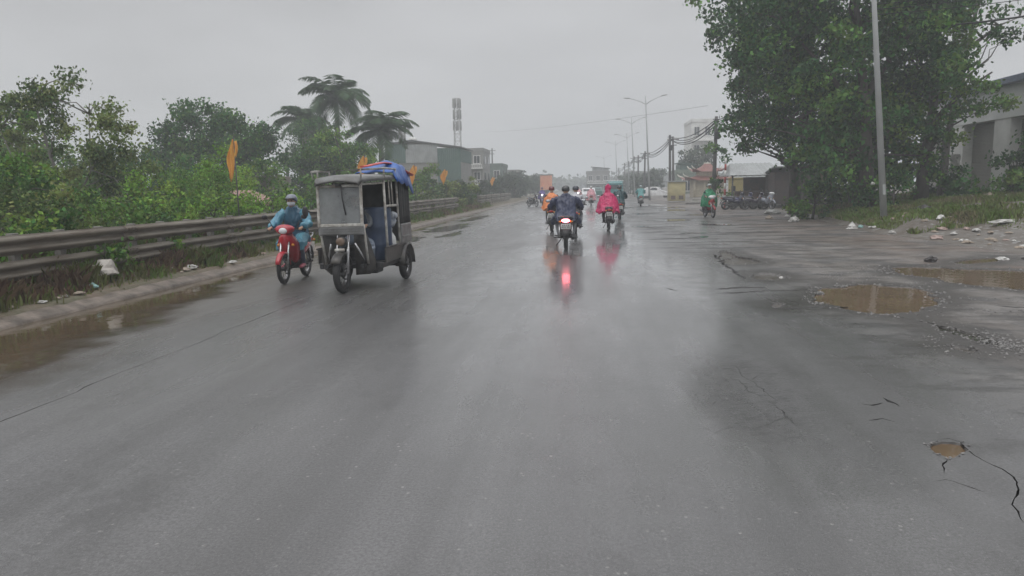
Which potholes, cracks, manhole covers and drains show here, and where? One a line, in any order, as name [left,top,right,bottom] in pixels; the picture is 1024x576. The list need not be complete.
crack [714,255,848,309]
crack [865,398,899,422]
pothole [875,264,1024,293]
pothole [923,440,971,459]
pothole [802,281,962,319]
crack [938,439,1022,520]
crack [686,362,804,442]
